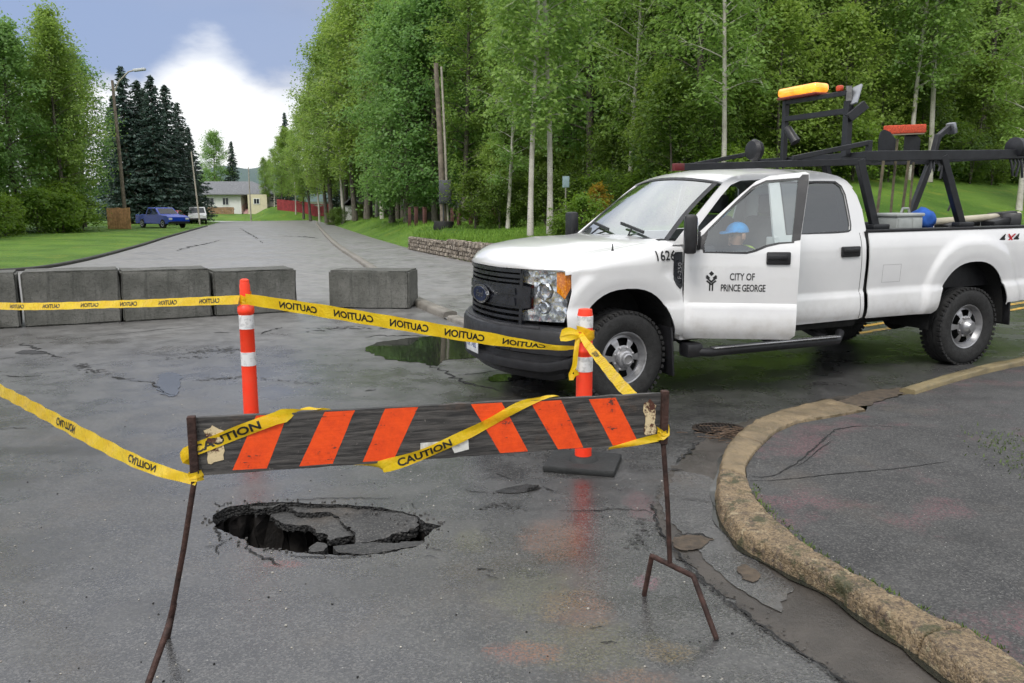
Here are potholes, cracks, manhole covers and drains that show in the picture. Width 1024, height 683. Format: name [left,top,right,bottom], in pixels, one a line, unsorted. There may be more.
crack [171,346,240,359]
drain grate [692,422,744,434]
crack [751,426,952,481]
crack [19,343,175,396]
crack [430,366,500,391]
